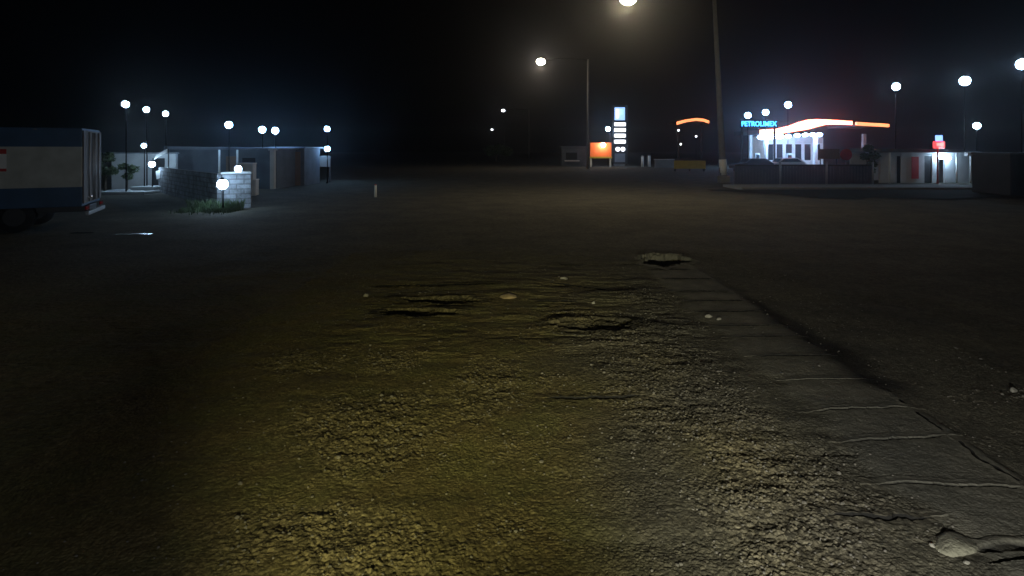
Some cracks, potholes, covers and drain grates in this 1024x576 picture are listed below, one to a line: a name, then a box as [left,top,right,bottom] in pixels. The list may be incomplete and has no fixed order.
pothole [369,307,472,318]
crack [641,268,1024,563]
pothole [534,315,648,333]
pothole [386,295,492,306]
pothole [634,252,700,270]
crack [535,389,650,402]
